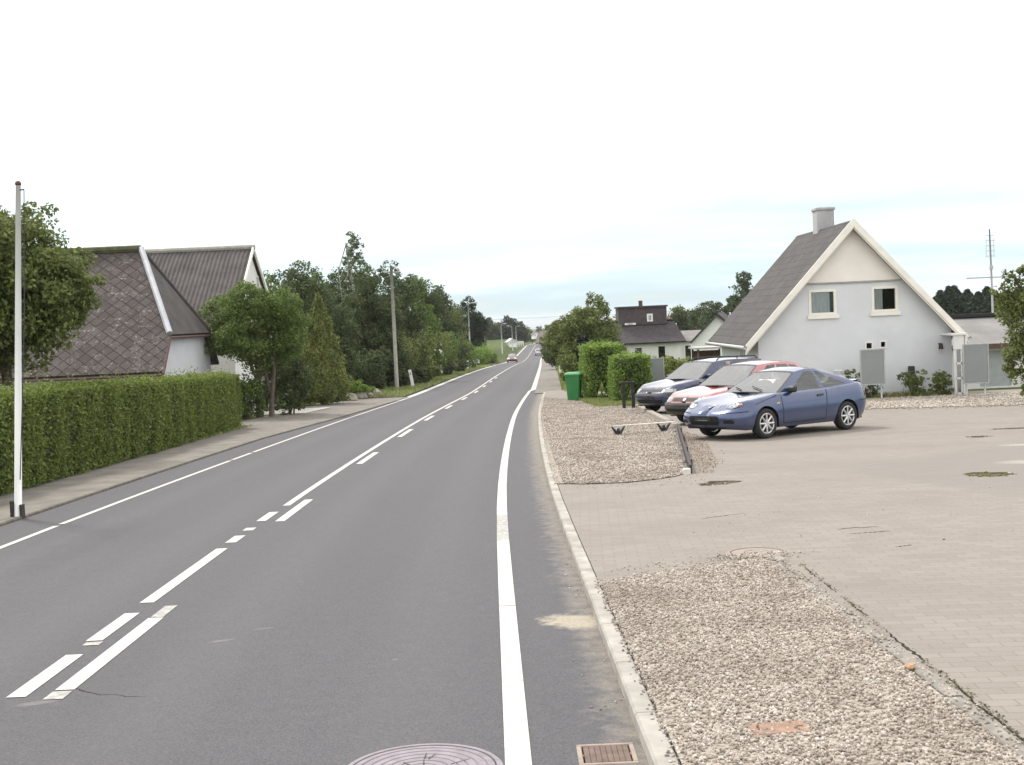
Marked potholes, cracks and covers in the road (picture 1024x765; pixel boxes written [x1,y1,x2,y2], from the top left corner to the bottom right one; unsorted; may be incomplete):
drain grate [576,742,639,765]
manhole cover [348,743,504,765]
manhole cover [726,547,788,558]
